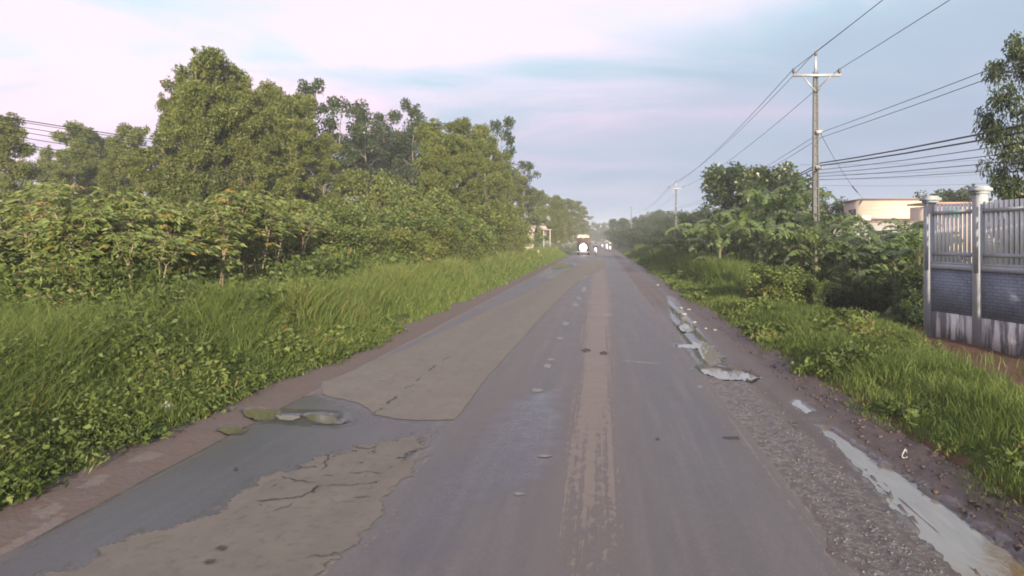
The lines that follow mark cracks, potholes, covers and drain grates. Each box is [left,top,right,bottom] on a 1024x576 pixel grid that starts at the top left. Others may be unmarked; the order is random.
pothole [215,425,244,435]
pothole [240,407,280,421]
crack [256,454,380,511]
pothole [677,323,696,333]
pothole [695,365,761,383]
pothole [302,412,351,425]
pothole [272,413,305,421]
crack [372,357,449,415]
